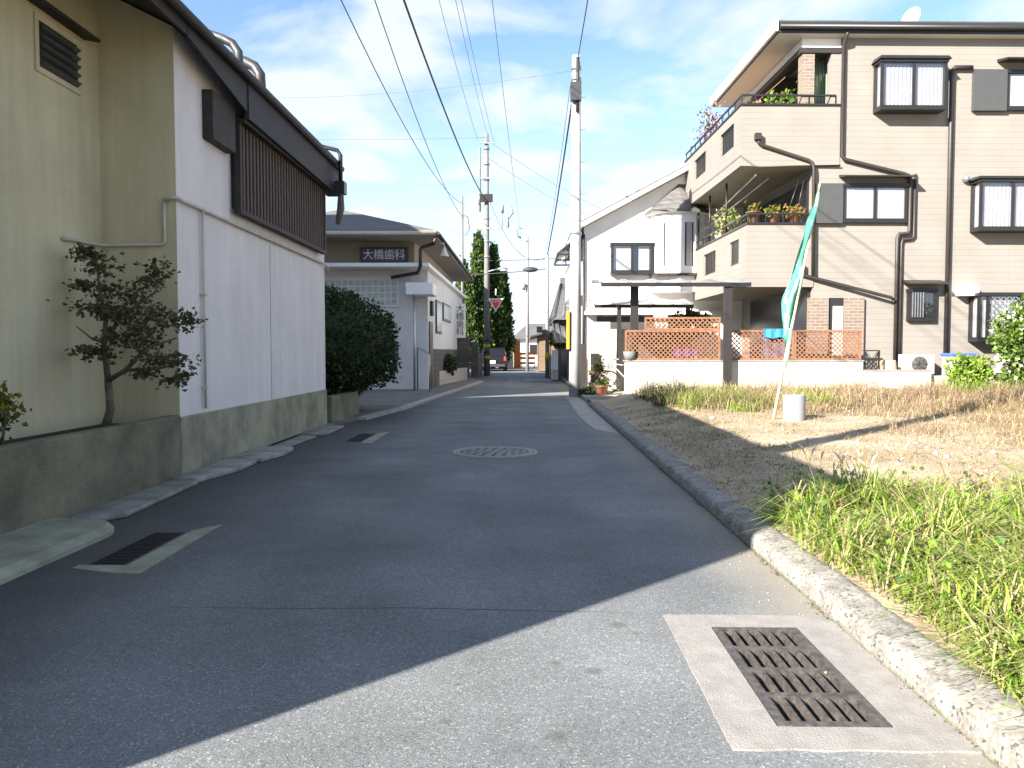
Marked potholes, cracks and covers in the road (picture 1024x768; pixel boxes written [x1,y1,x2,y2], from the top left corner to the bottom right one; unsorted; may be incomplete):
drain grate [663,614,982,754]
manhole cover [451,446,538,458]
